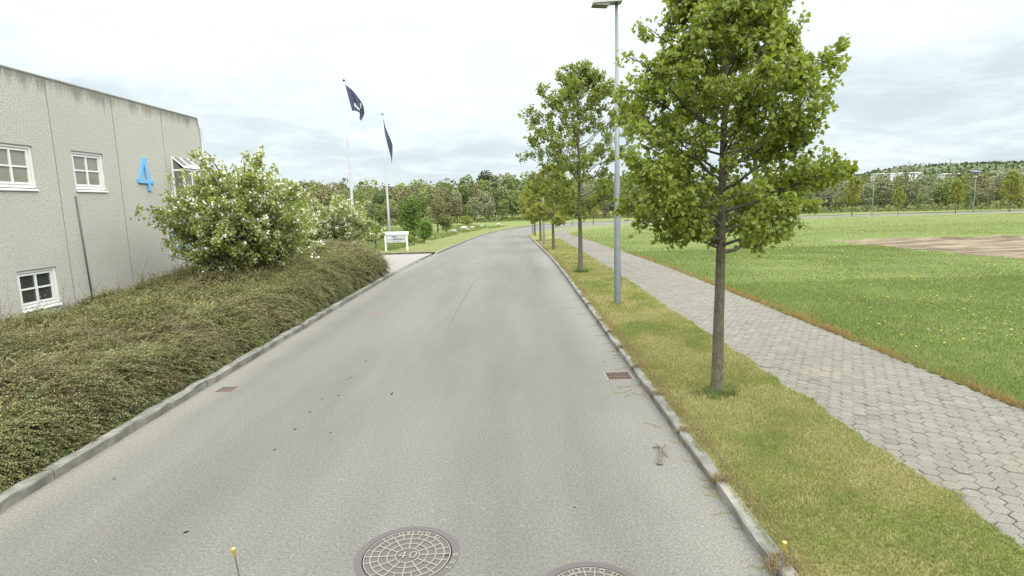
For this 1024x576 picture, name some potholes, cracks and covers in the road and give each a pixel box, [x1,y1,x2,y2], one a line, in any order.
manhole cover [354,526,460,576]
manhole cover [545,562,635,576]
drain grate [603,371,635,380]
